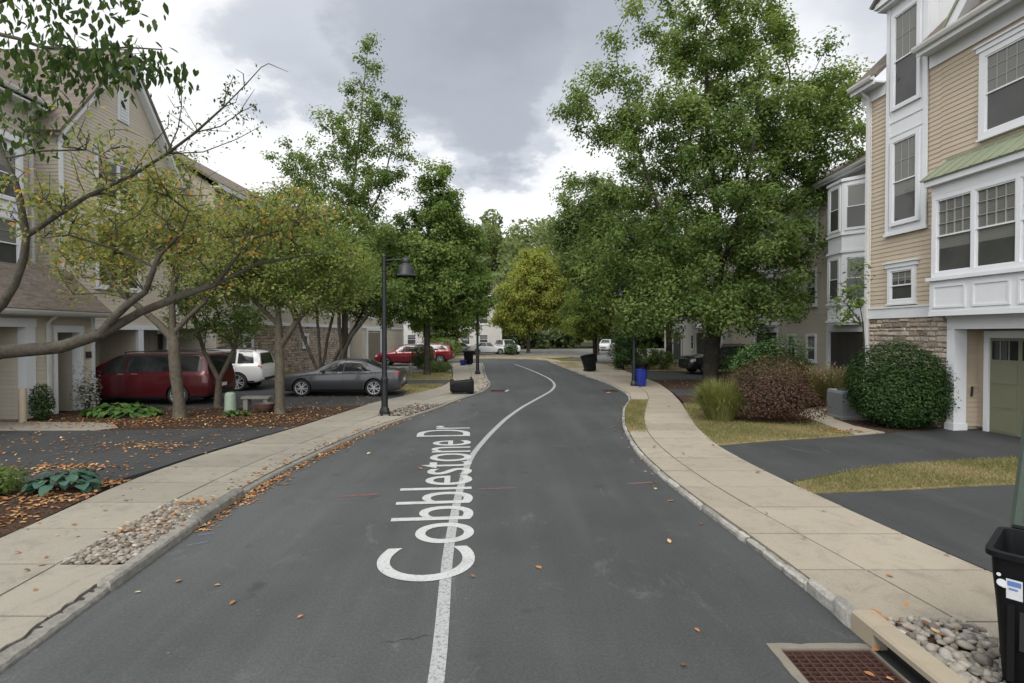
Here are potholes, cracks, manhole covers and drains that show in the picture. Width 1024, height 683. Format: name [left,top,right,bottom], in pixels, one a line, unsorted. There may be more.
drain grate [766,643,910,683]
